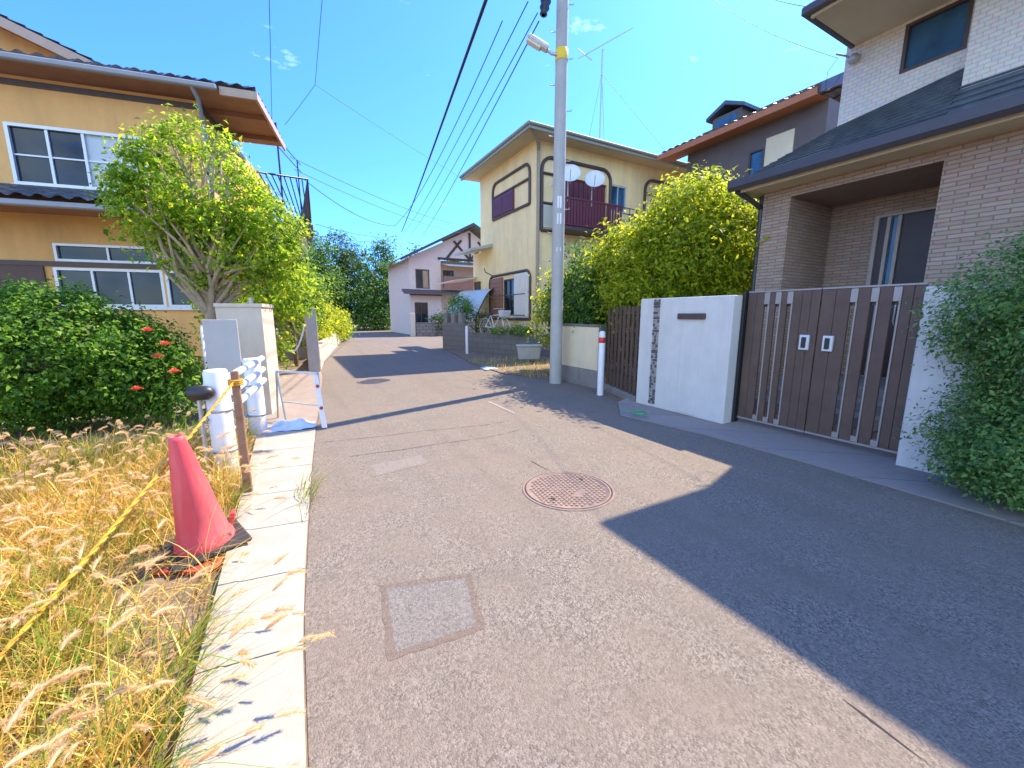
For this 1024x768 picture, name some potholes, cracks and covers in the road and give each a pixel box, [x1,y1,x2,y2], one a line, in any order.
manhole cover [522,471,615,511]
